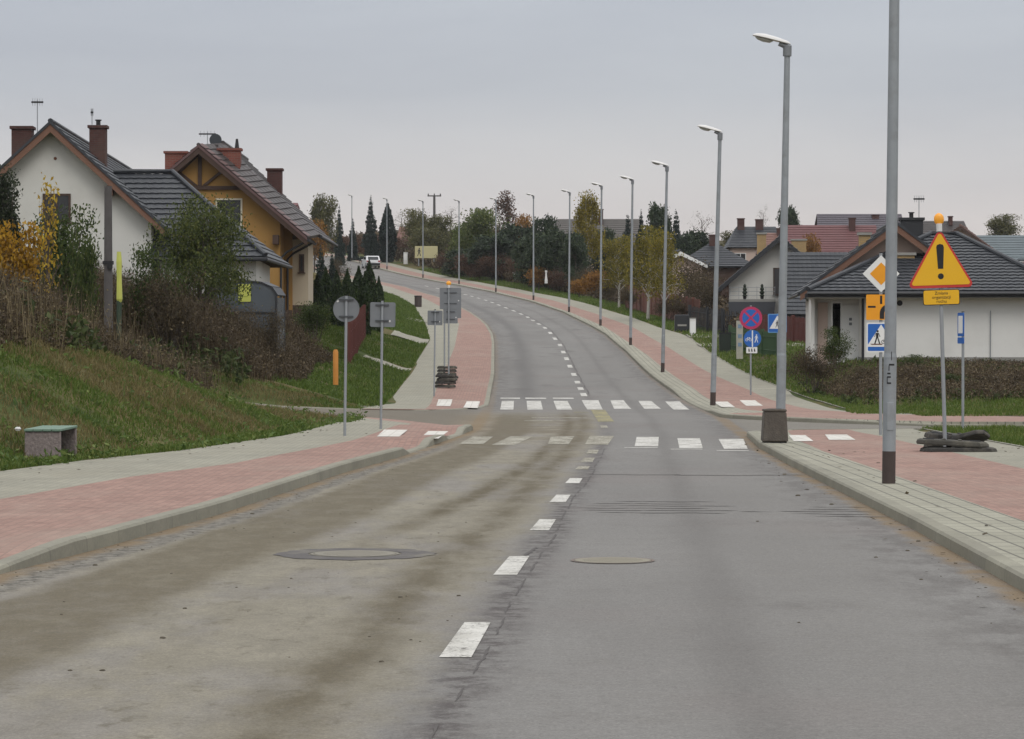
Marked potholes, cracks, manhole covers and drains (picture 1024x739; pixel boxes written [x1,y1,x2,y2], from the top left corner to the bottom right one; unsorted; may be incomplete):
manhole cover [272,548,436,560]
